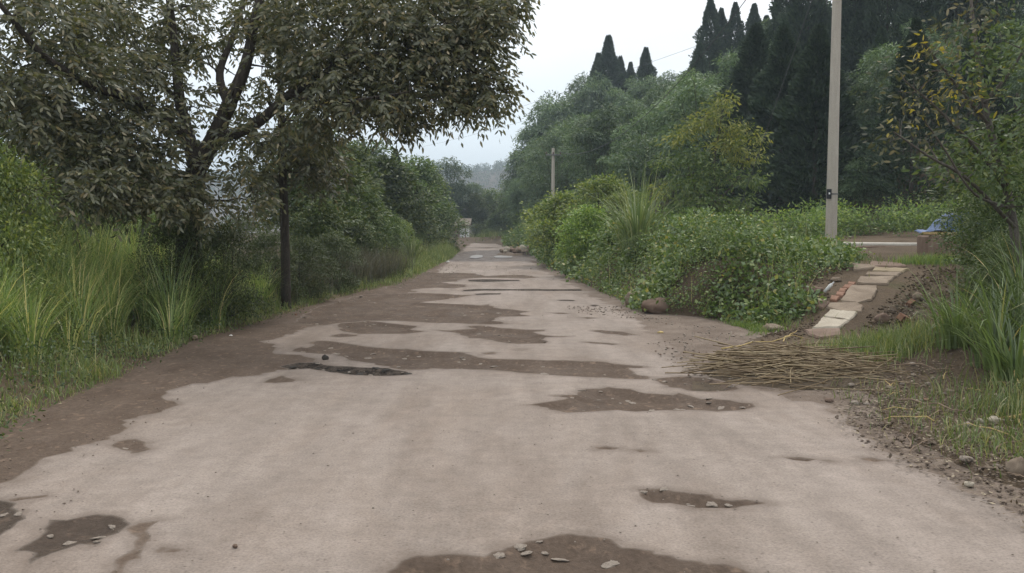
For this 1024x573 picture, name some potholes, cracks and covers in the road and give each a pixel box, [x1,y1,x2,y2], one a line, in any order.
pothole [14,514,132,564]
pothole [111,439,152,453]
pothole [529,387,756,413]
pothole [386,533,752,573]
pothole [637,487,769,509]
pothole [436,326,568,344]
pothole [337,321,424,334]
pothole [292,341,651,380]
